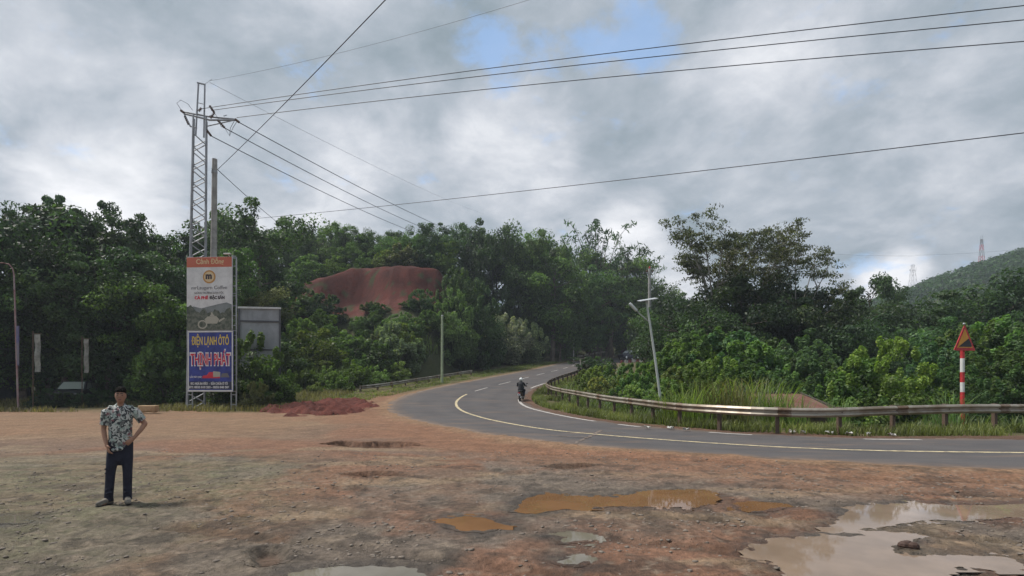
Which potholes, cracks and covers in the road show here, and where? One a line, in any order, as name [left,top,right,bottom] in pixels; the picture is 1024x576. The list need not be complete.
pothole [240,544,296,568]
pothole [320,440,422,448]
pothole [432,514,517,534]
pothole [277,563,443,576]
pothole [548,531,606,547]
pothole [727,501,794,514]
pothole [814,500,1024,533]
pothole [507,489,721,514]
pothole [739,531,1024,576]
pothole [550,554,598,567]
